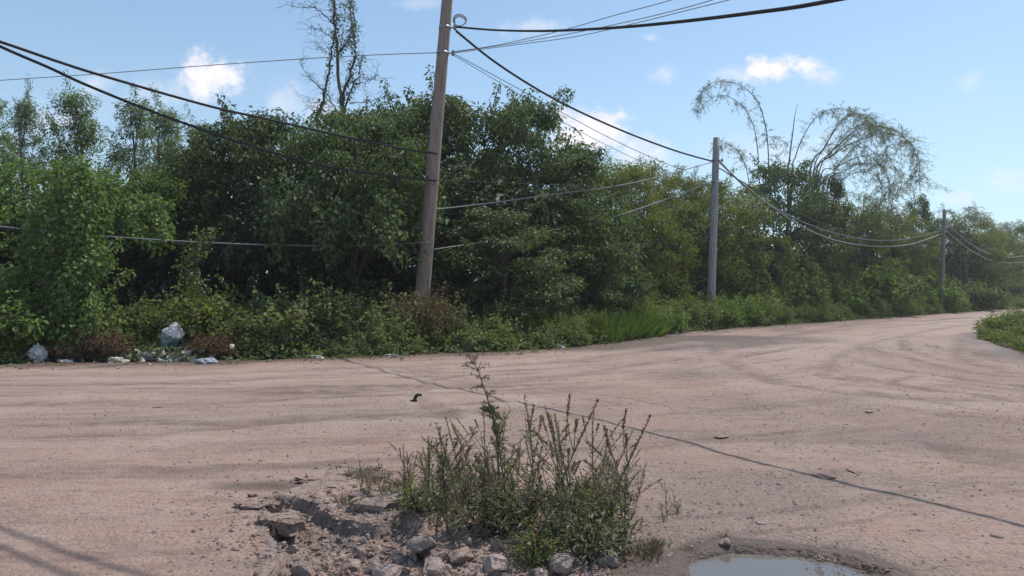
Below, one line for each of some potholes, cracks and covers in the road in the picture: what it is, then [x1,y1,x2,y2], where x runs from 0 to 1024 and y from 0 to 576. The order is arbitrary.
pothole [662,540,904,576]
pothole [251,493,442,576]
